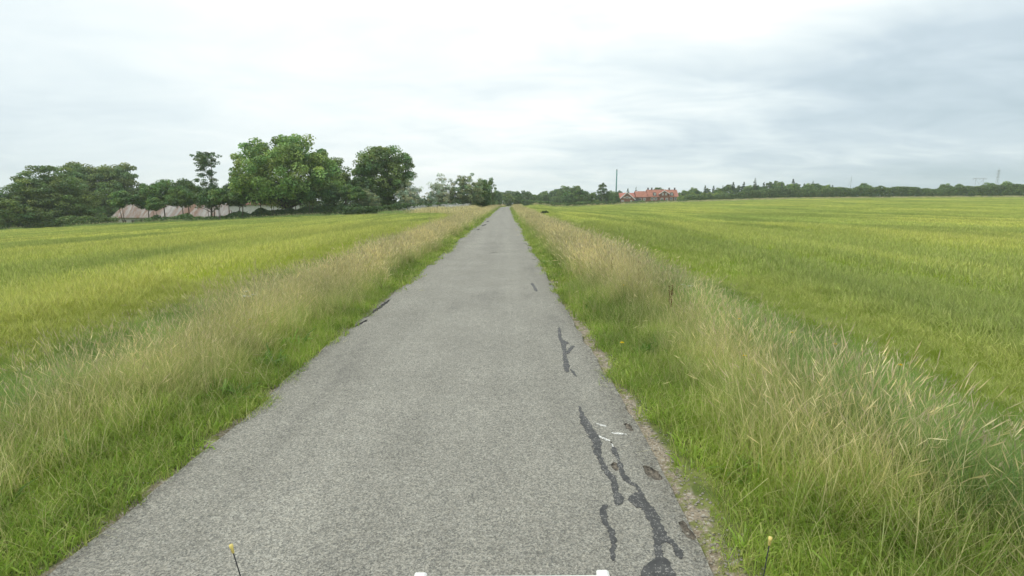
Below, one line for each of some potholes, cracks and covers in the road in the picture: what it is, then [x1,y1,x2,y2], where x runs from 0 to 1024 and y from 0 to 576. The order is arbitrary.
pothole [678,521,696,540]
pothole [643,465,662,480]
